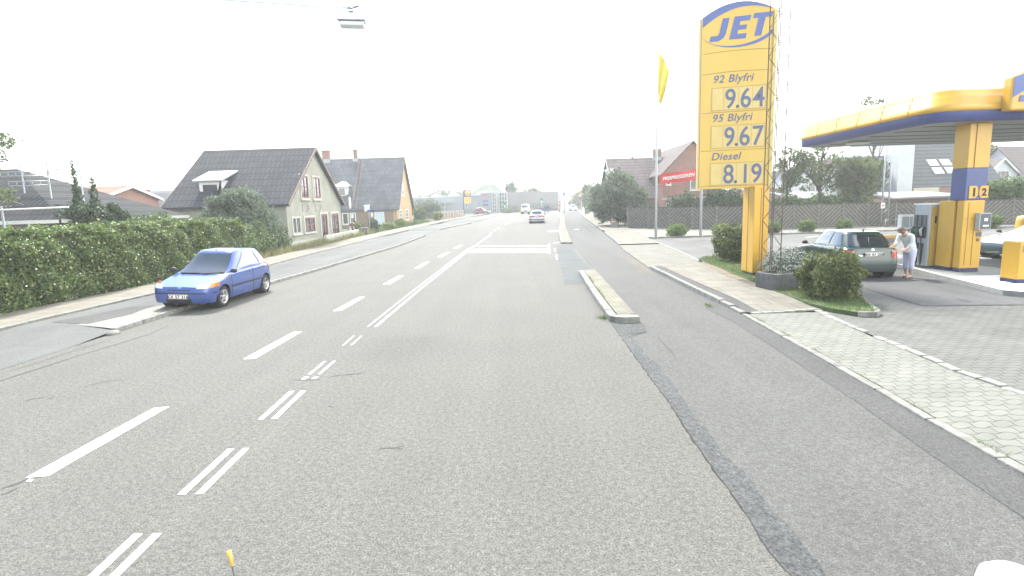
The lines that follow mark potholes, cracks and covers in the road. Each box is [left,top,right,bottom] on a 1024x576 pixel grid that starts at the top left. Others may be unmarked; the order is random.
crack [609,321,792,576]
